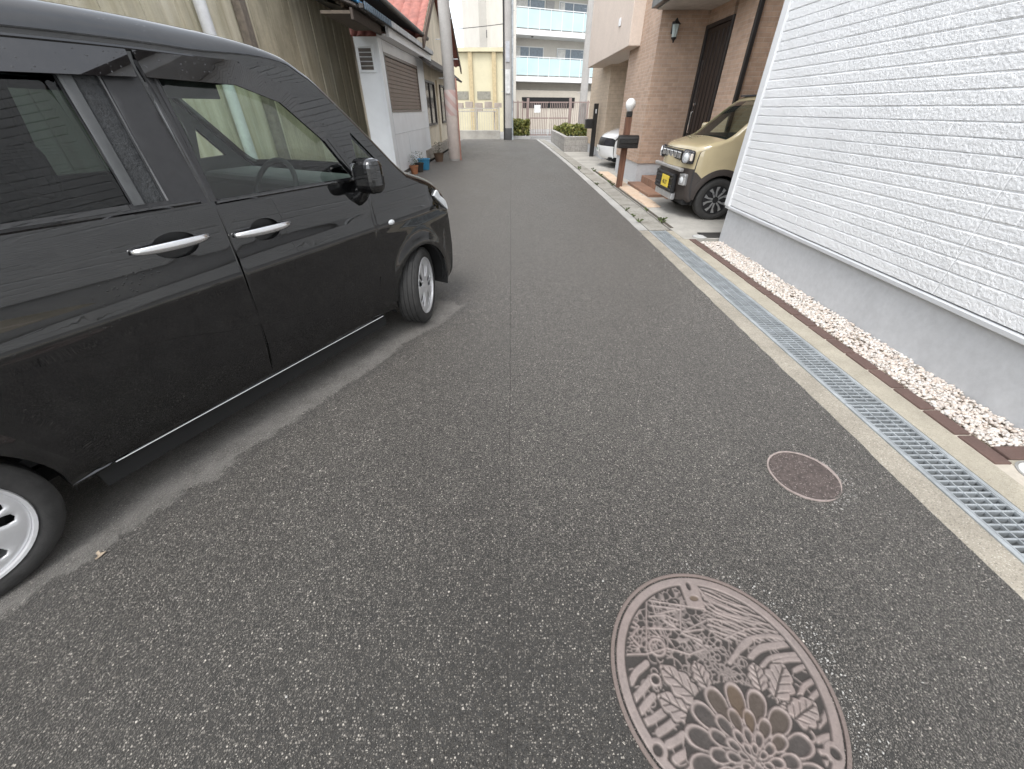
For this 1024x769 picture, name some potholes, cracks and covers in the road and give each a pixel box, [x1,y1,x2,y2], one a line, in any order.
manhole cover [611,573,852,769]
manhole cover [767,451,842,502]
